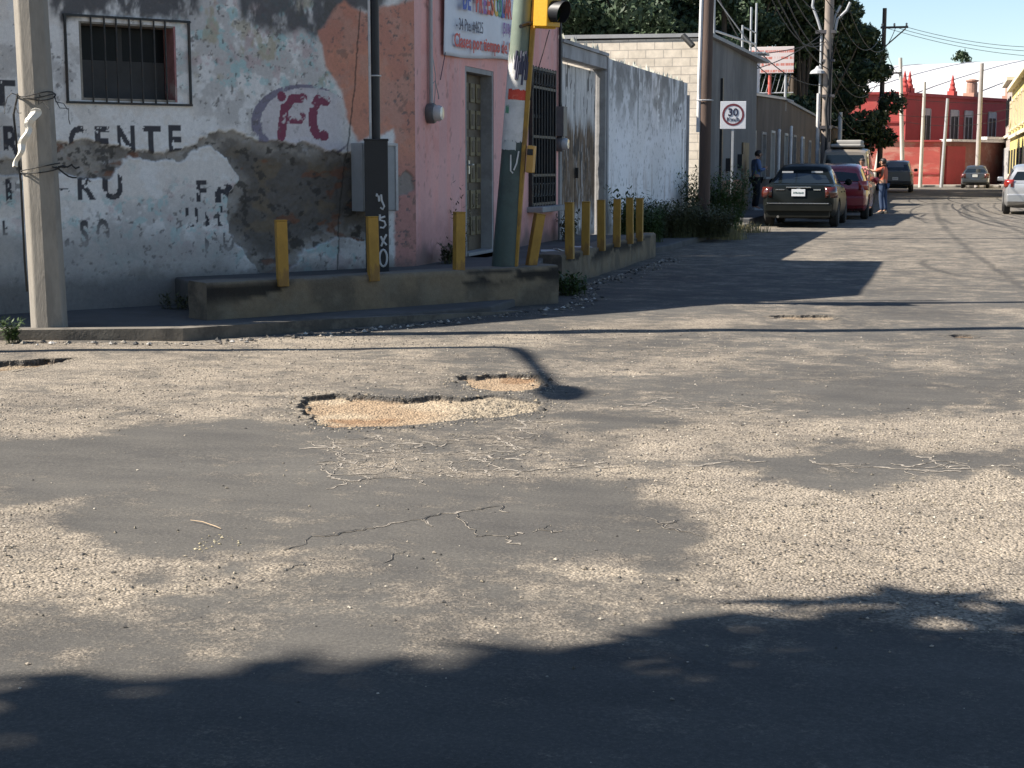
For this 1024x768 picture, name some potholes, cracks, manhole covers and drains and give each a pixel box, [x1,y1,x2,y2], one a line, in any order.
pothole [289,392,555,430]
pothole [447,373,553,394]
crack [283,505,562,569]
pothole [0,357,83,373]
crack [647,516,702,536]
